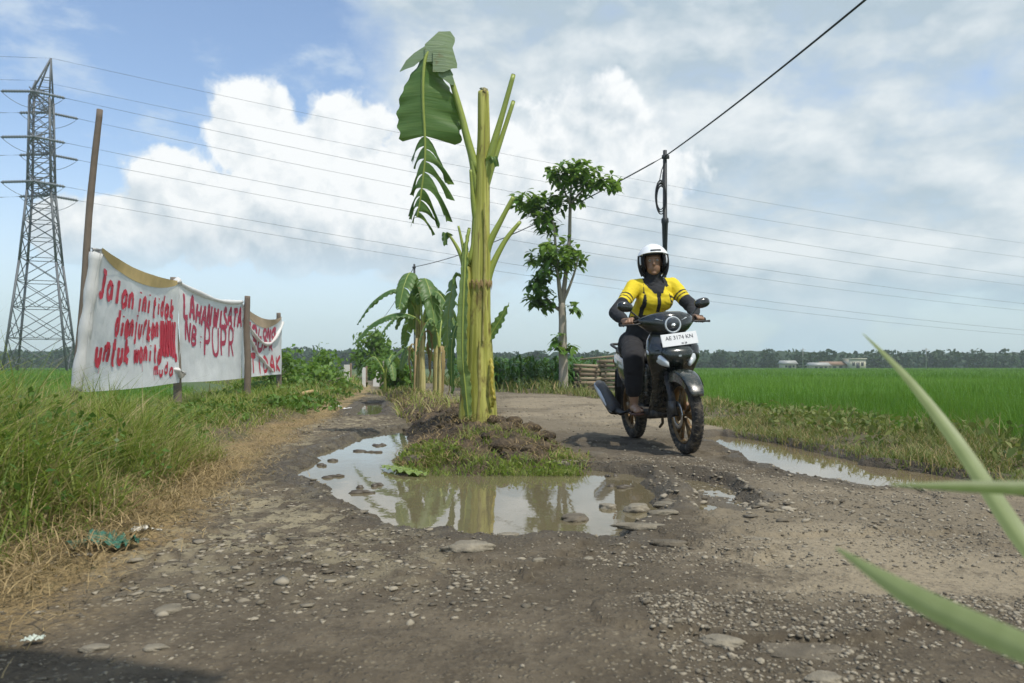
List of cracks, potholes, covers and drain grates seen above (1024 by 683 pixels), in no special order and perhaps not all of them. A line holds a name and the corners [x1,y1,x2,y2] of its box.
pothole [685,429,1011,486]
pothole [665,465,761,511]
pothole [285,423,679,537]
pothole [352,401,389,415]
